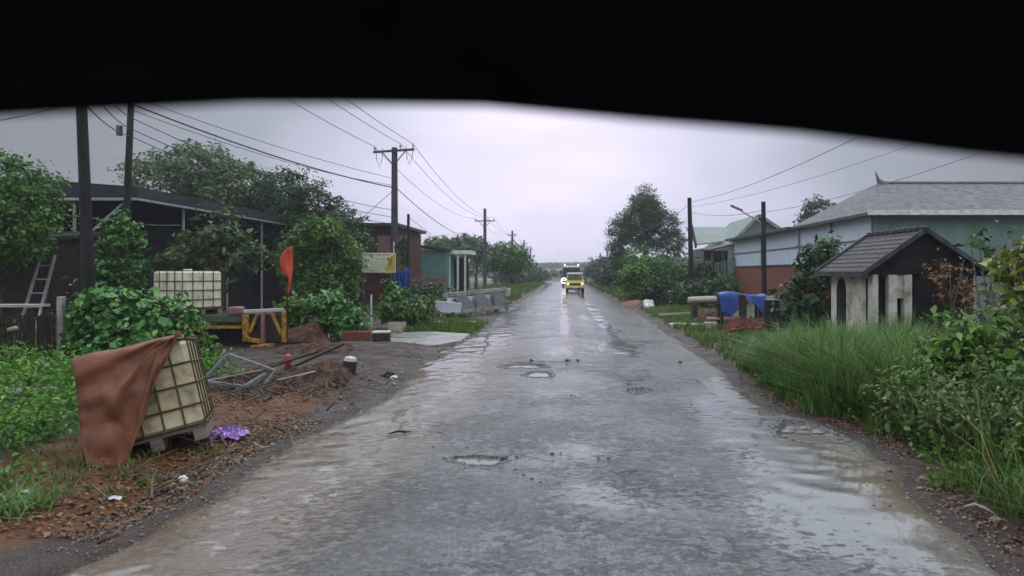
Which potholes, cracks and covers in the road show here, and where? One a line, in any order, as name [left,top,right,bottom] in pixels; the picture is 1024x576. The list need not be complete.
pothole [443,454,512,467]
pothole [520,370,556,378]
pothole [769,418,851,444]
pothole [623,386,657,395]
